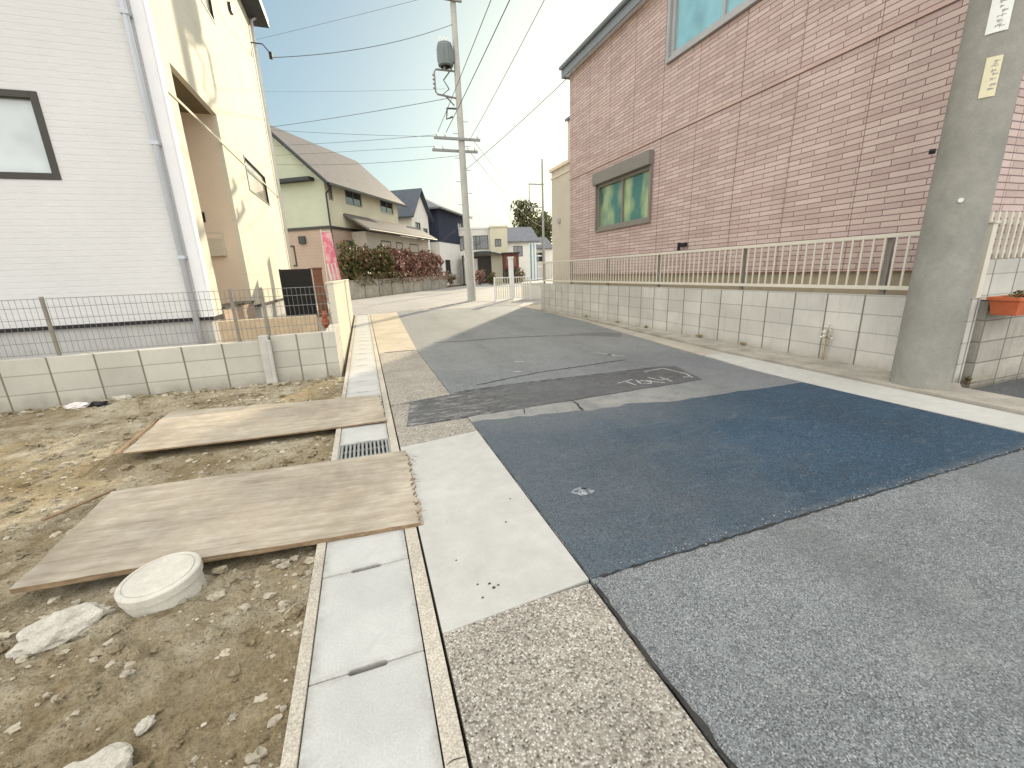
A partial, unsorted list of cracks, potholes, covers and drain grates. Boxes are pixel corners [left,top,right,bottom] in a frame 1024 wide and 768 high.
drain grate [337,438,391,460]
